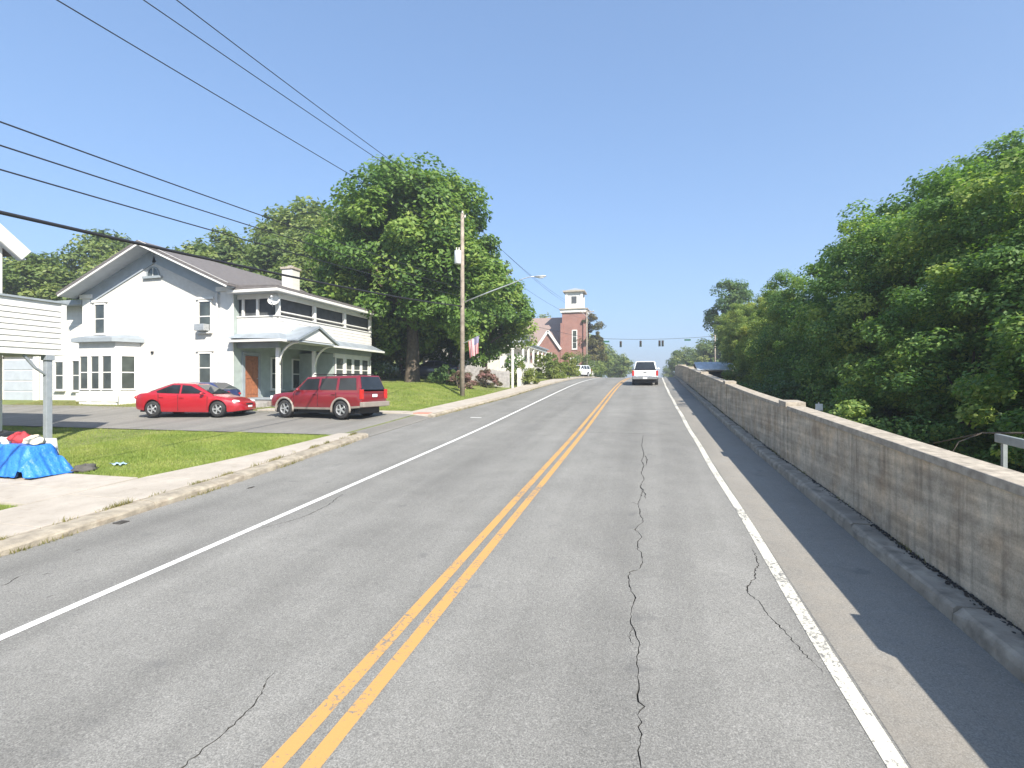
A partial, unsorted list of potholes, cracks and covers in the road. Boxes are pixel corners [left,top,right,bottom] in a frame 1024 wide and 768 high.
crack [746,550,822,670]
crack [587,432,674,768]
crack [181,674,273,768]
